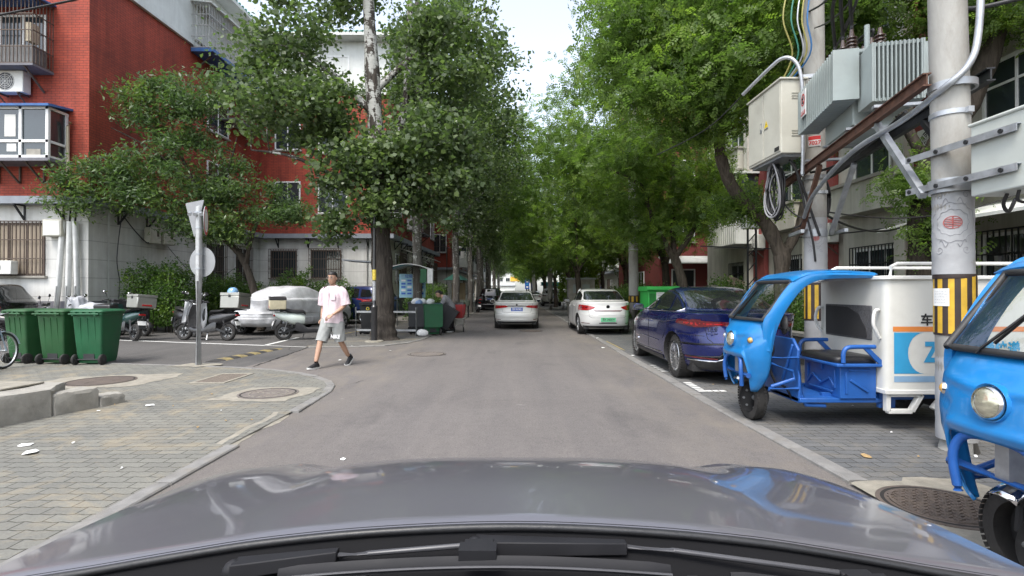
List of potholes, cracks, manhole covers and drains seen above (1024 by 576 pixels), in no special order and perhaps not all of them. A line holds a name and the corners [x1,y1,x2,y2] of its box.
manhole cover [204,387,321,402]
manhole cover [44,373,183,389]
manhole cover [189,373,254,384]
manhole cover [851,477,992,548]
